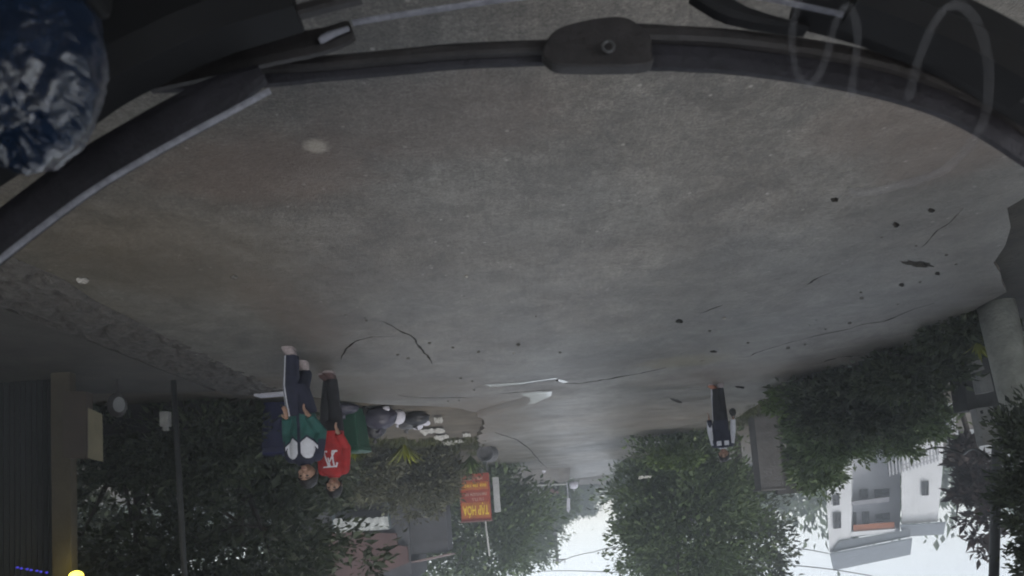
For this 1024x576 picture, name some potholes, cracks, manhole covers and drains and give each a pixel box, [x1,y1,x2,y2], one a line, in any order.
pothole [900,260,934,268]
crack [341,321,433,364]
crack [495,432,547,468]
